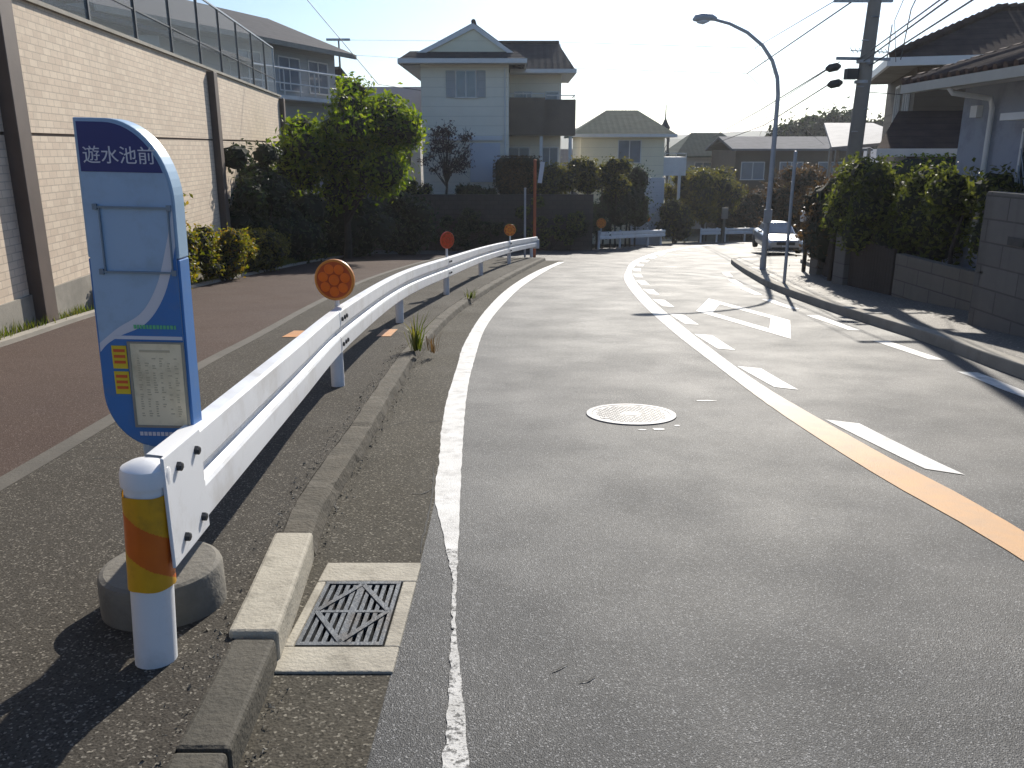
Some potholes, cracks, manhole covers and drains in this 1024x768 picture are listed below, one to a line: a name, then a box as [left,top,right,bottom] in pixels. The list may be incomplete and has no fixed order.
drain grate [275,563,421,674]
manhole cover [586,404,677,426]
